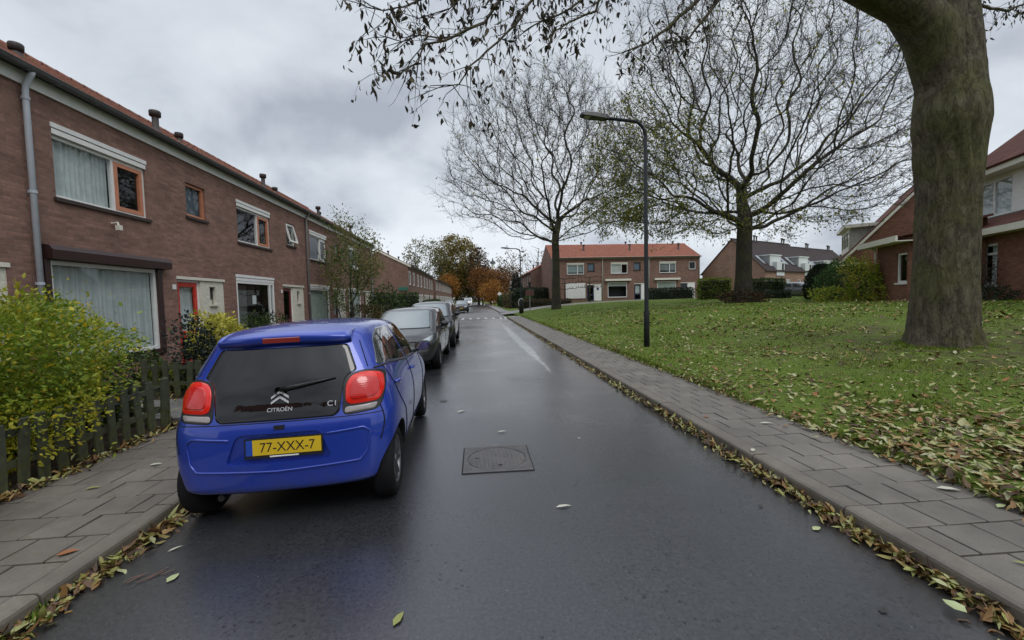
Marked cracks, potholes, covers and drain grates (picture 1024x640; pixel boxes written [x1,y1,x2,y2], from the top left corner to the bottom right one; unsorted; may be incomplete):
manhole cover [461,445,535,474]
